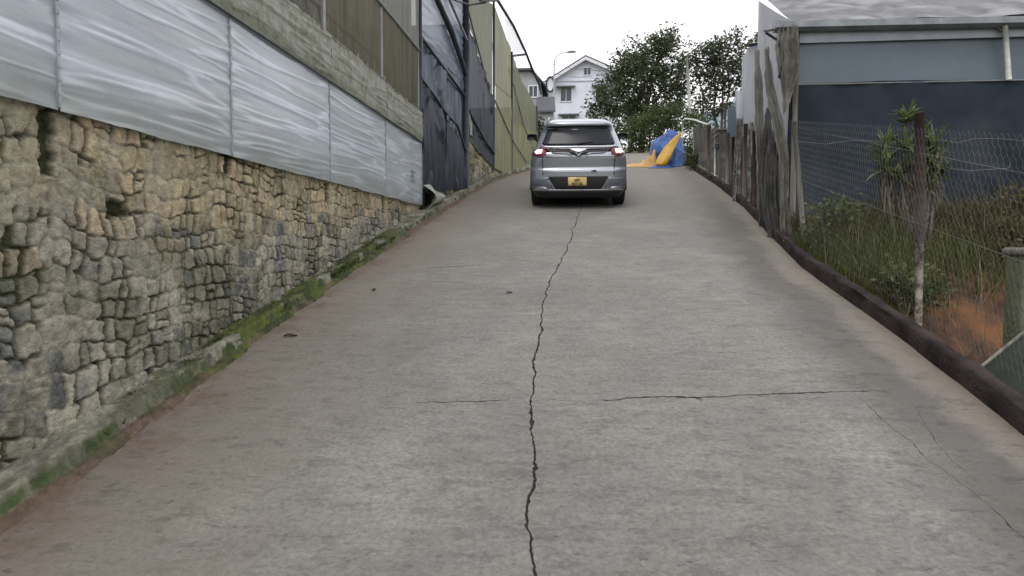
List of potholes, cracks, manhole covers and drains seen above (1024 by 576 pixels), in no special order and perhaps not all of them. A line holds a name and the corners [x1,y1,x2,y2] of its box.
crack [411,201,1022,576]
